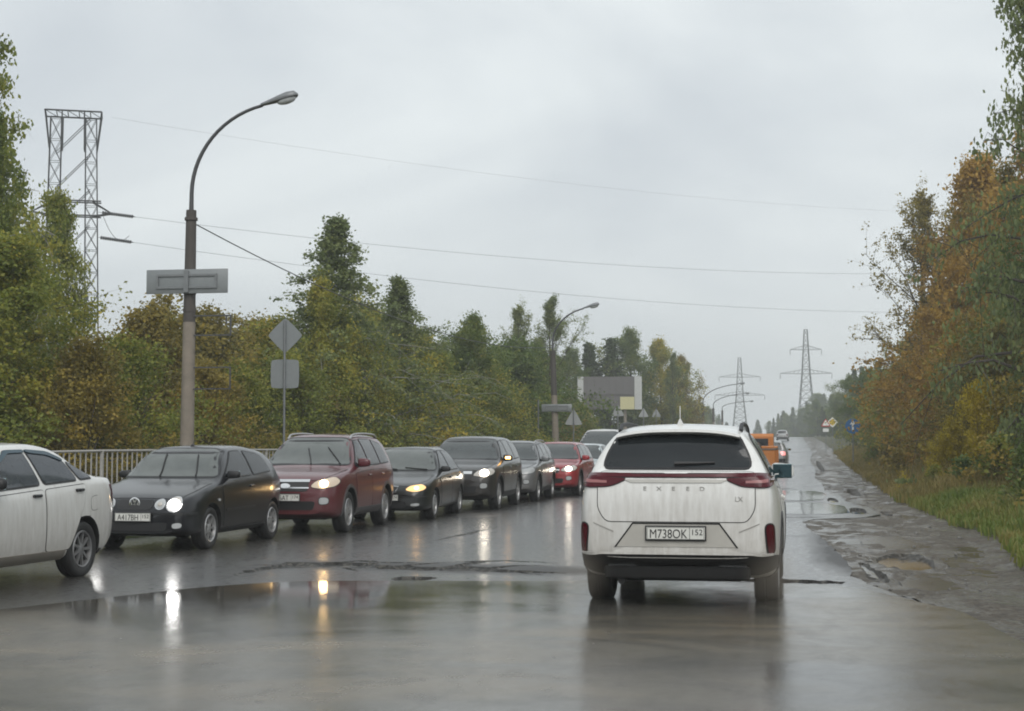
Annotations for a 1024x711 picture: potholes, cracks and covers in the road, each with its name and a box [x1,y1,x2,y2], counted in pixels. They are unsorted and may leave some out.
crack [232,560,560,575]
pothole [876,553,935,570]
pothole [858,563,890,583]
